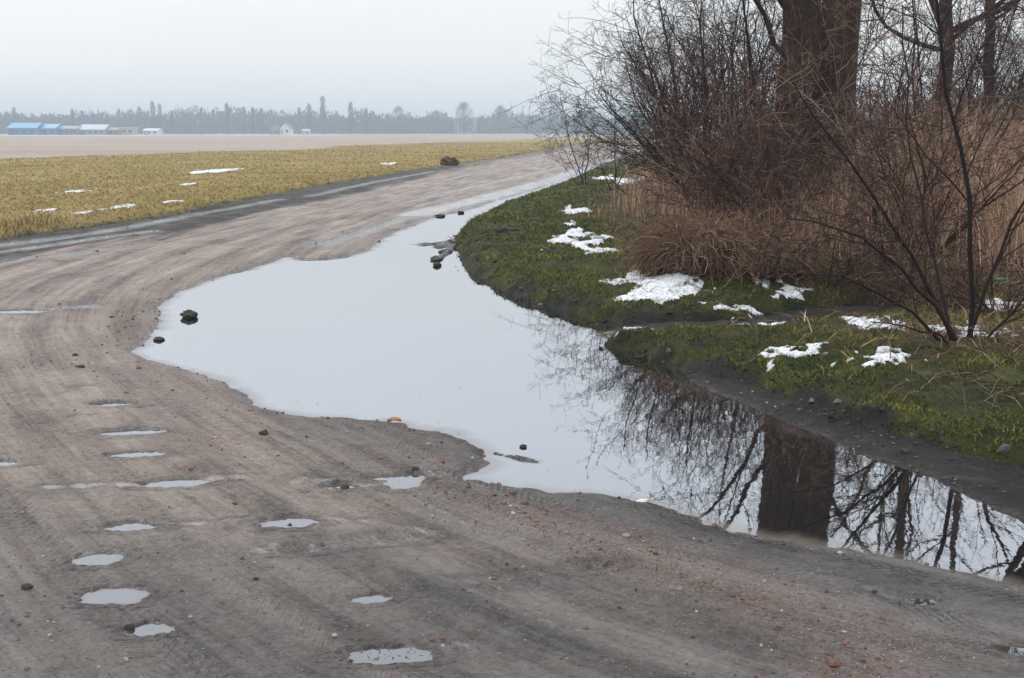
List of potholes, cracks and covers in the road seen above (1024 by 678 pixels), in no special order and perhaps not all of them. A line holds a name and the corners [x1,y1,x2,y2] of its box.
pothole [330,587,413,608]
pothole [235,510,342,533]
pothole [346,467,441,493]
pothole [79,446,197,461]
pothole [65,423,200,438]
pothole [101,615,195,643]
pothole [48,546,142,571]
pothole [59,581,175,610]
pothole [75,514,185,535]
pothole [107,473,244,491]
pothole [315,639,462,671]
